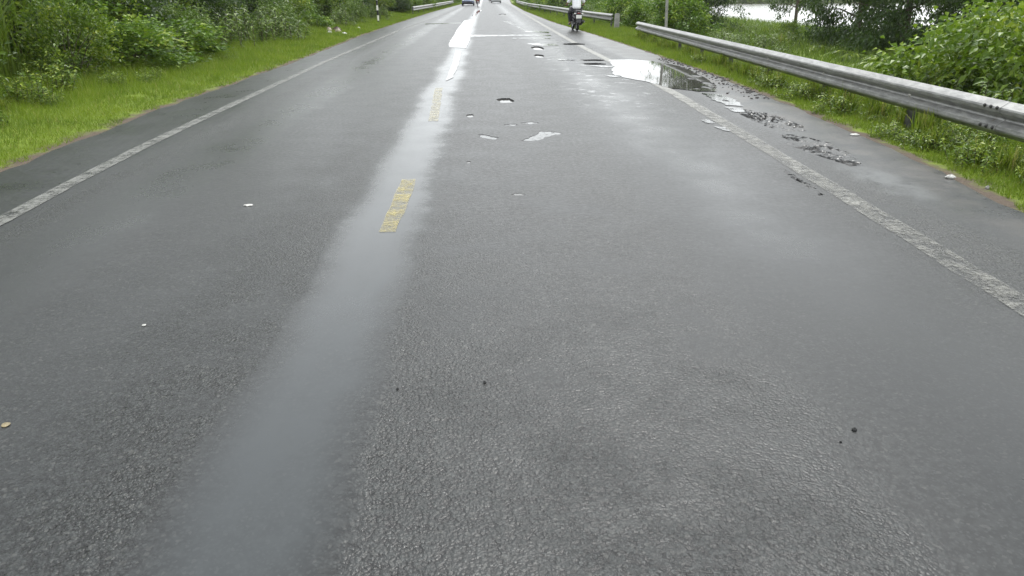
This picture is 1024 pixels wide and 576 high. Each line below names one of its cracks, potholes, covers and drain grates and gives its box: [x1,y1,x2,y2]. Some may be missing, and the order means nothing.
pothole [521,131,563,141]
